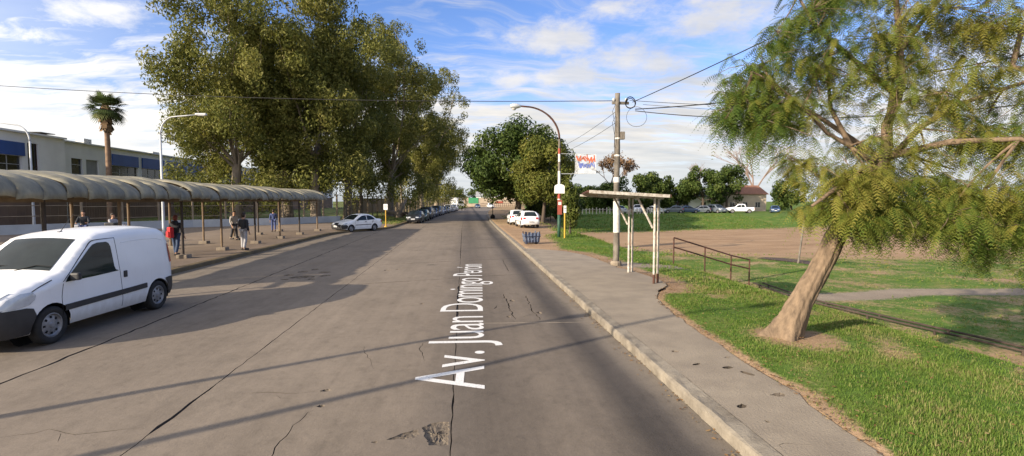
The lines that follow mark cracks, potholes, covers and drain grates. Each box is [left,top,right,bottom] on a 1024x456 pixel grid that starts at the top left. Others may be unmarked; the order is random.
crack [1,428,144,441]
pothole [371,422,450,446]
crack [485,293,542,319]
crack [244,391,313,456]
